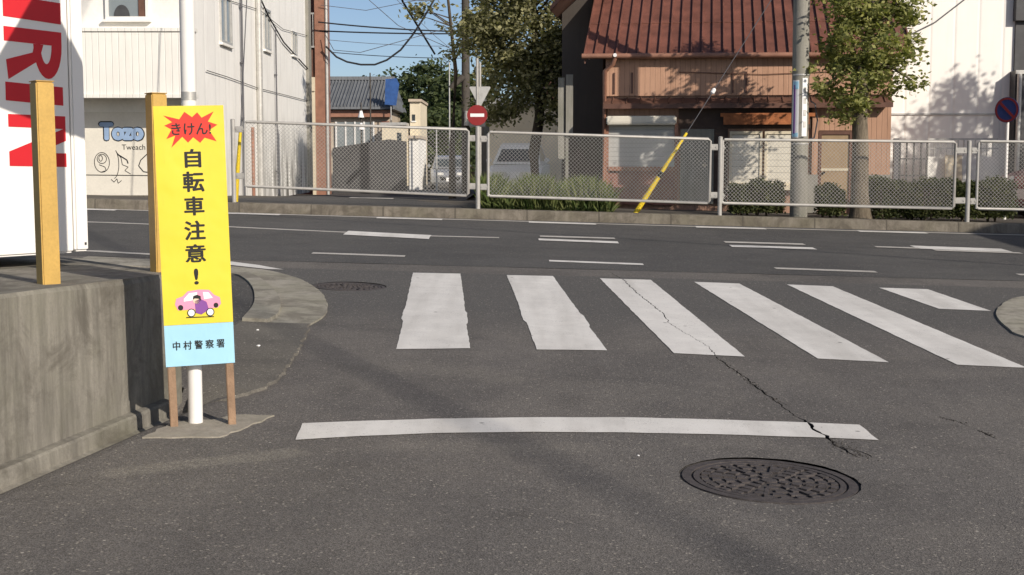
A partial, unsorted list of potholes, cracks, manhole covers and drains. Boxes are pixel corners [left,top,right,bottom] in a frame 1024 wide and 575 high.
manhole cover [313,282,386,291]
crack [612,273,879,461]
manhole cover [679,459,861,505]
